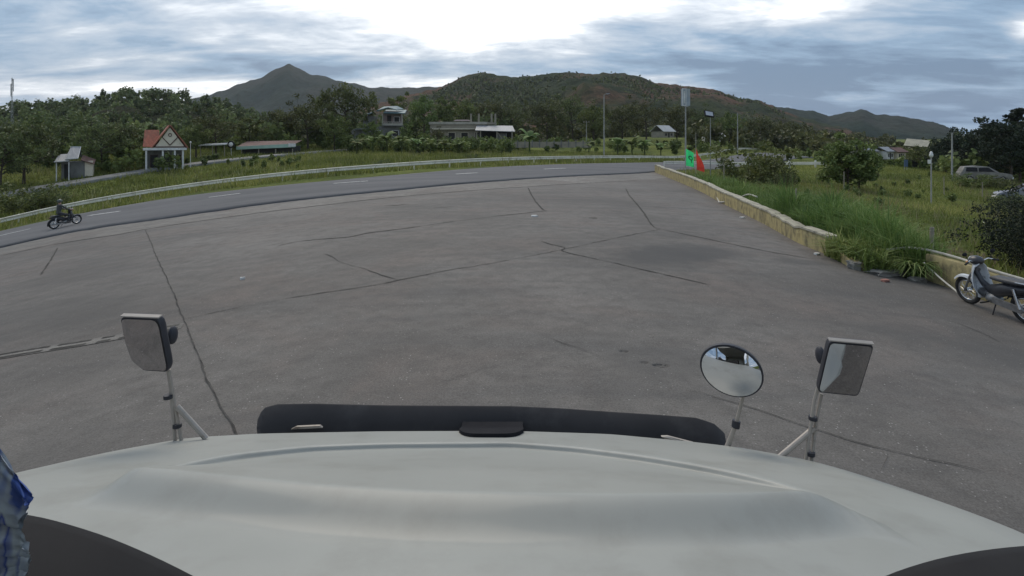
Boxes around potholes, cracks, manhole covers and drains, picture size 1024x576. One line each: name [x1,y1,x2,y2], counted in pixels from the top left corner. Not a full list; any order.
crack [145,230,238,435]
crack [194,188,812,317]
crack [687,388,985,472]
